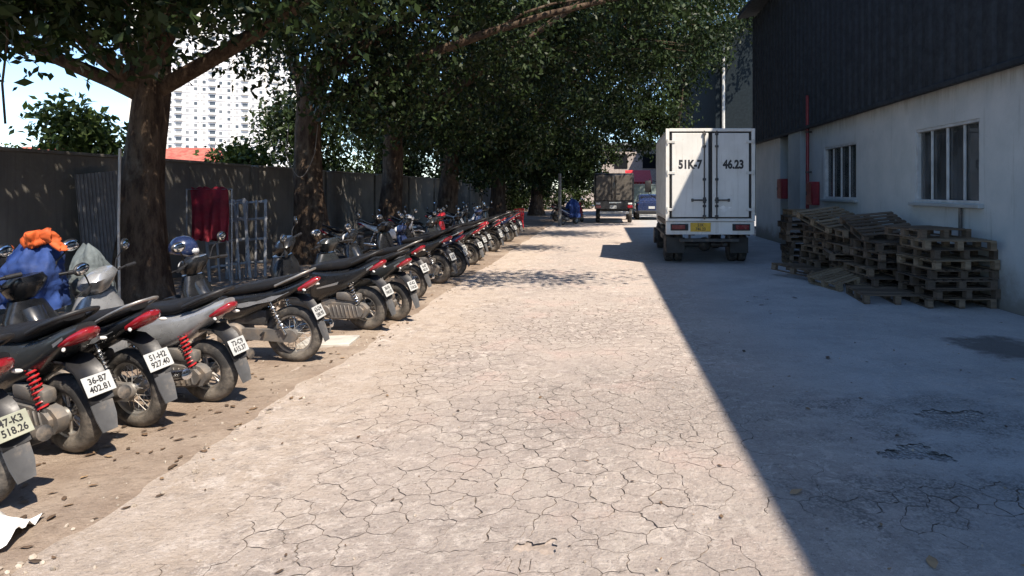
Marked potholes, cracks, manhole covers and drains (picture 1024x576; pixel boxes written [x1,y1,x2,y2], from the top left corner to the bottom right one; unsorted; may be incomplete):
pothole [913,409,985,428]
crack [825,482,1024,548]
pothole [877,443,958,463]
crack [159,285,824,576]
pothole [513,538,576,561]
